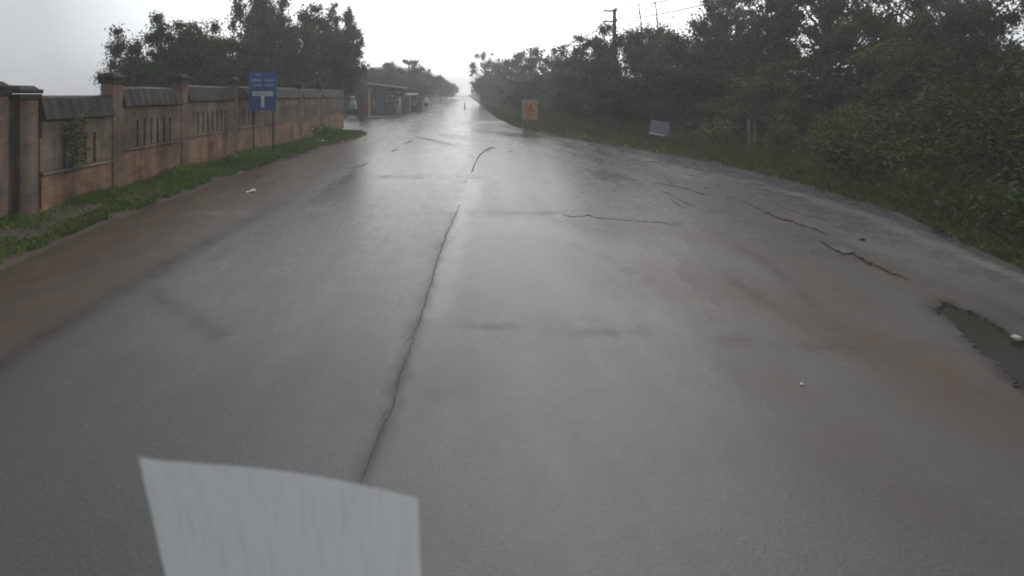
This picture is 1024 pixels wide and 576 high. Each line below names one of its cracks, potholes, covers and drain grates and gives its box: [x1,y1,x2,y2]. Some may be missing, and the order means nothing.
pothole [929,300,1024,389]
crack [564,182,704,225]
crack [741,200,912,282]
crack [360,204,461,485]
